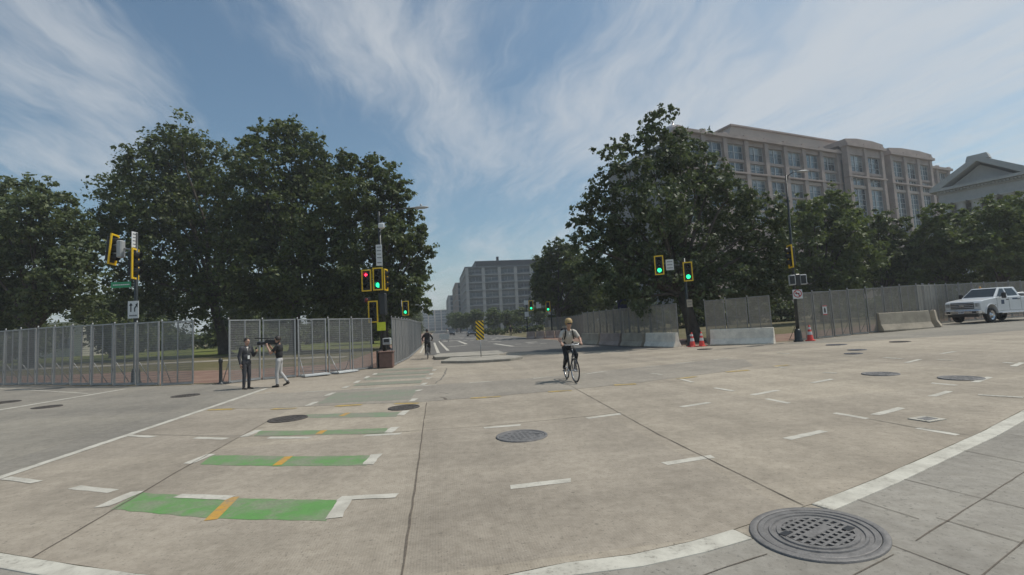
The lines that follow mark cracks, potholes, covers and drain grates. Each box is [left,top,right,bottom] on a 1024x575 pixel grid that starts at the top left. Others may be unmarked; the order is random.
manhole cover [267,415,308,423]
manhole cover [749,507,892,564]
manhole cover [496,429,548,443]
